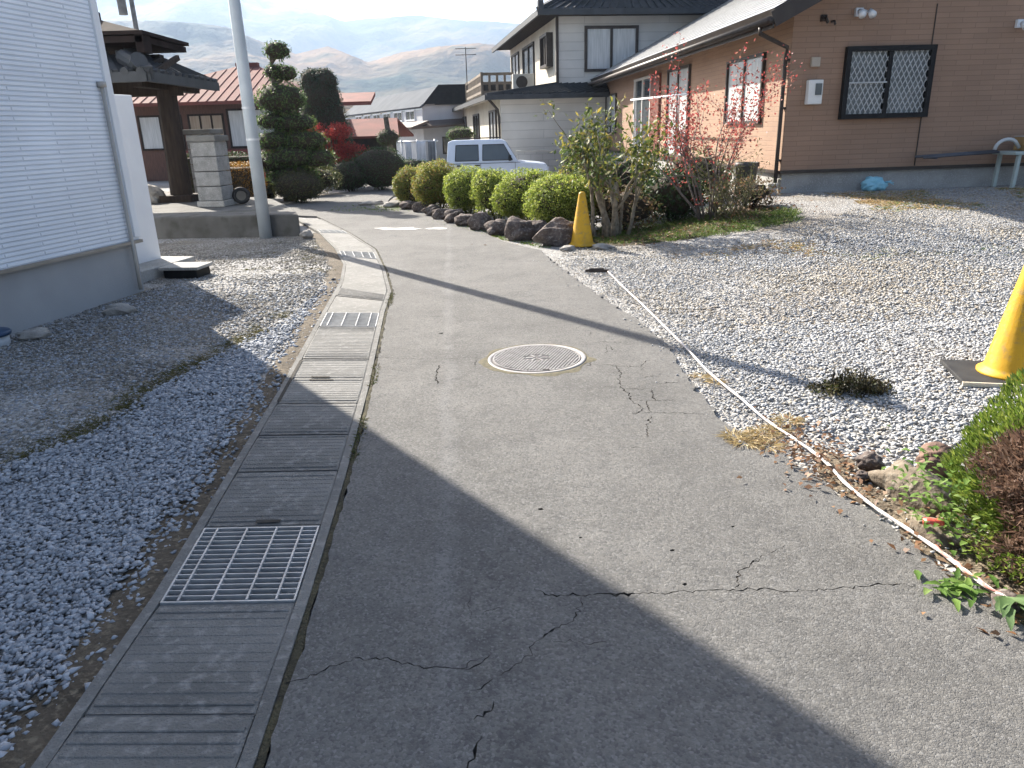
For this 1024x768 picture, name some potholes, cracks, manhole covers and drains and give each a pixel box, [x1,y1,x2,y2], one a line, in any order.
drain grate [160,525,320,605]
drain grate [339,251,377,259]
drain grate [320,312,379,327]
crack [579,325,693,448]
manhole cover [488,344,586,373]
crack [286,546,915,768]
